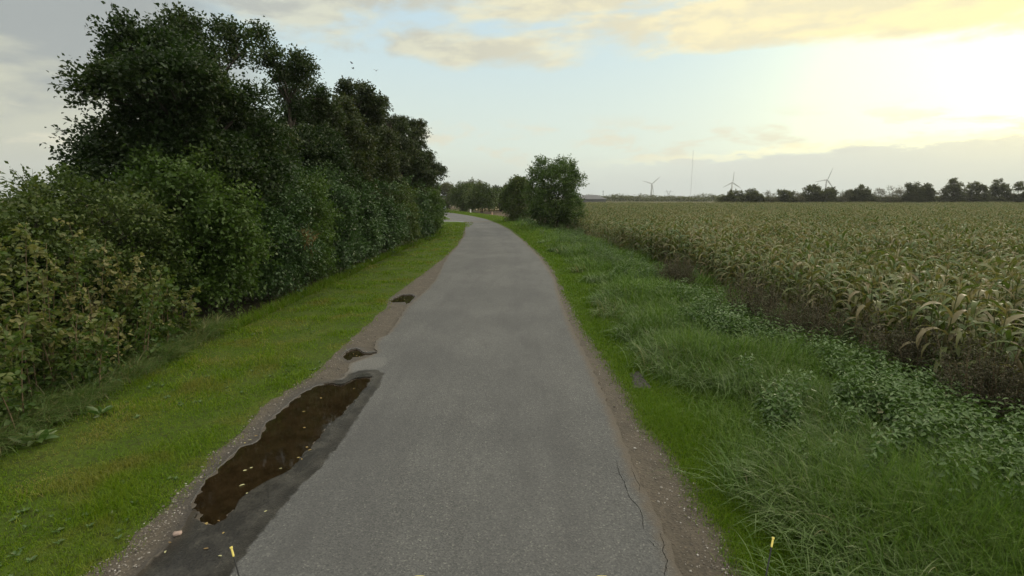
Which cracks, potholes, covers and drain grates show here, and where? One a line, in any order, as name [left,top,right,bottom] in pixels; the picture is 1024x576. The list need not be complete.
pothole [191,377,372,525]
pothole [390,294,415,304]
pothole [342,348,377,360]
